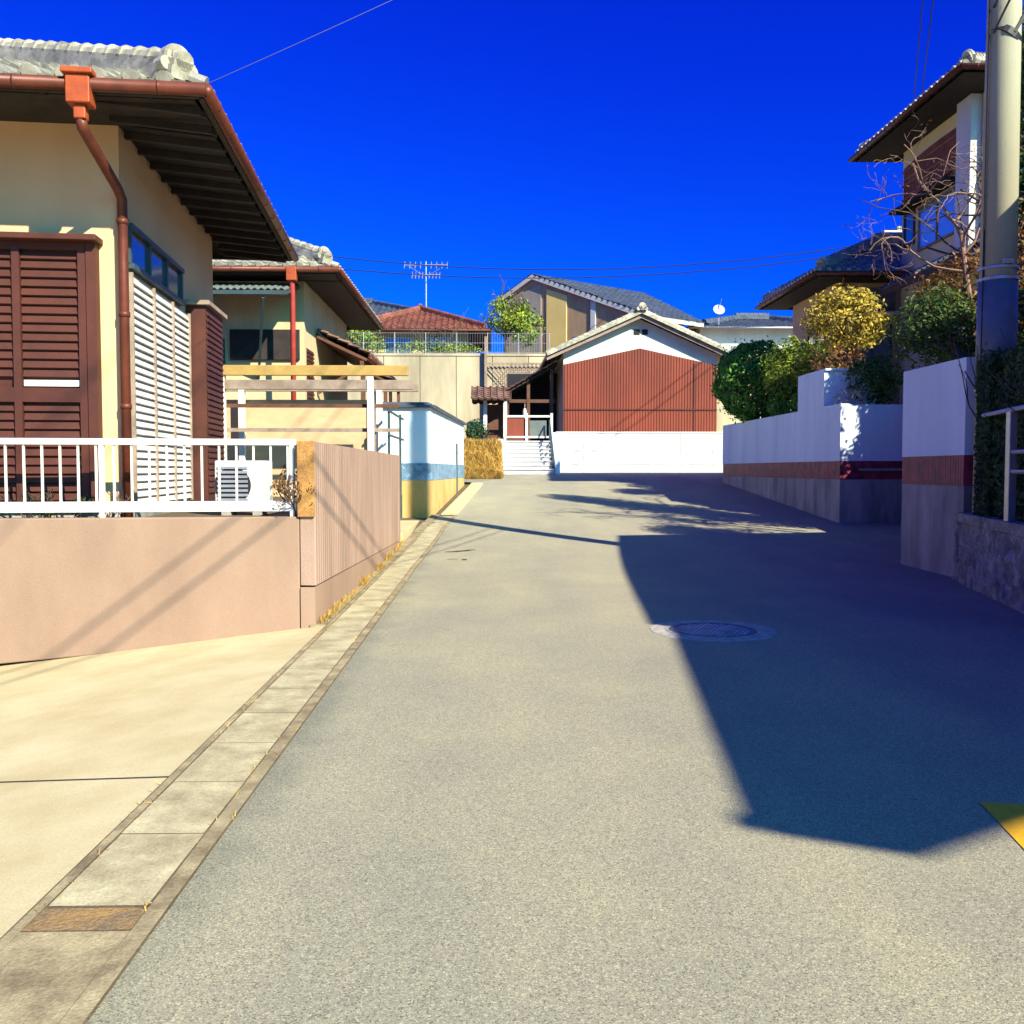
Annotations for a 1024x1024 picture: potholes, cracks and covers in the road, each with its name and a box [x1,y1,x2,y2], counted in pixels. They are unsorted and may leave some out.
manhole cover [649,620,778,642]
